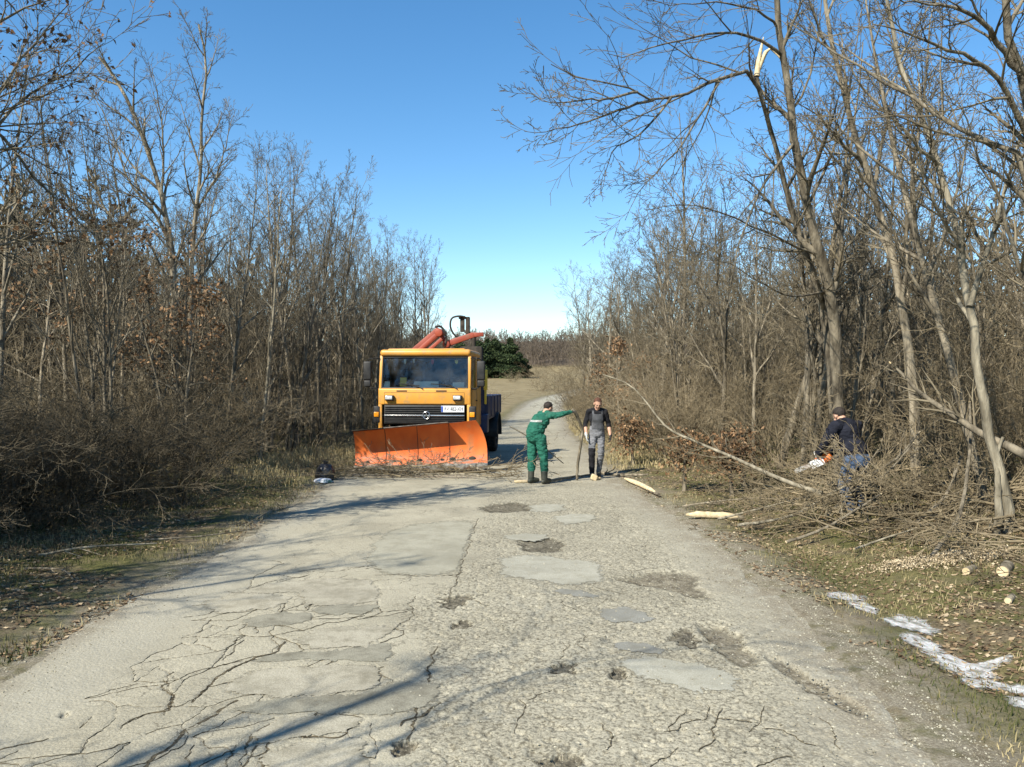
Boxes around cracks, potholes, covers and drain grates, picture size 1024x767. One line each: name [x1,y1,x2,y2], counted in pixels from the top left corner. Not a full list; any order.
crack [0,561,416,767]
pothole [550,663,577,674]
crack [650,707,840,767]
pothole [436,596,476,609]
pothole [517,539,565,553]
pothole [481,502,530,513]
pothole [668,628,702,649]
